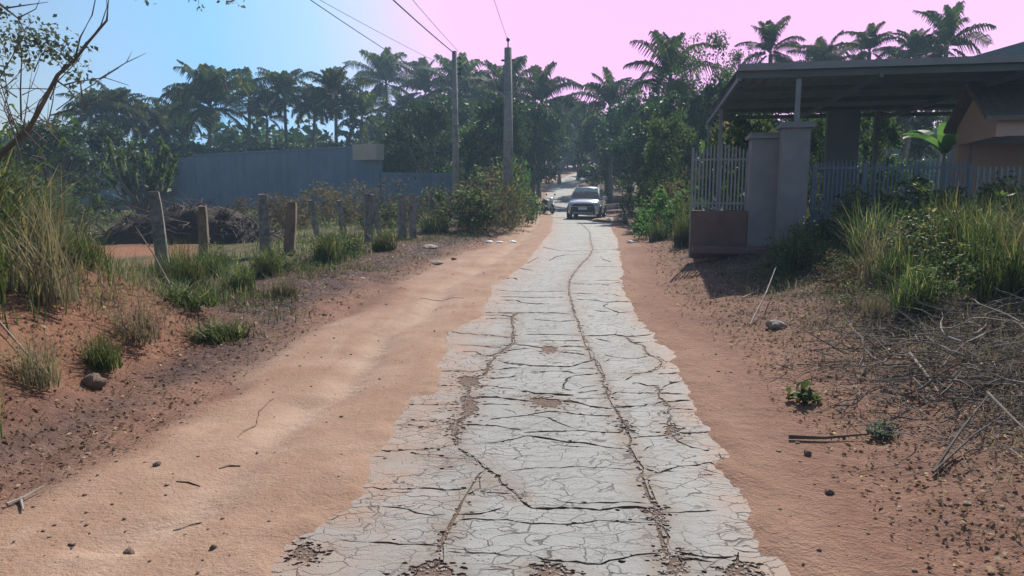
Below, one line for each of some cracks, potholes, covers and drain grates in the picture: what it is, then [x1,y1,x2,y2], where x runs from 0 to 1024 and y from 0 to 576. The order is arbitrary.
pothole [520,393,574,413]
pothole [445,373,494,390]
pothole [438,389,487,423]
pothole [283,537,334,567]
crack [337,222,750,576]
